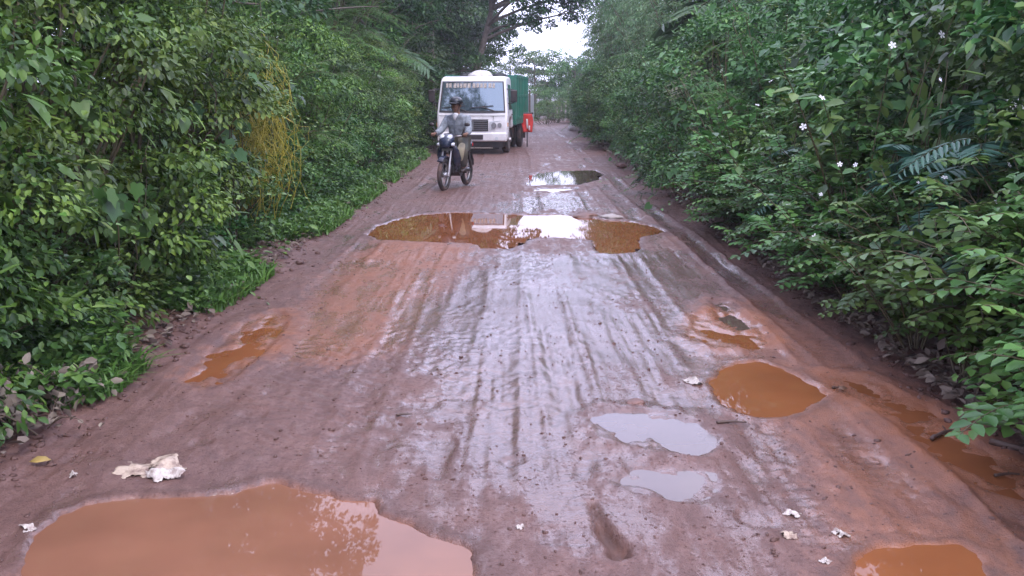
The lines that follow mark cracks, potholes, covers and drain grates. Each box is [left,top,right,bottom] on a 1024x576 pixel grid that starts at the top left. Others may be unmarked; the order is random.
pothole [361,211,670,254]
pothole [824,533,1011,576]
pothole [522,169,607,186]
pothole [0,472,501,576]
pothole [699,357,847,421]
